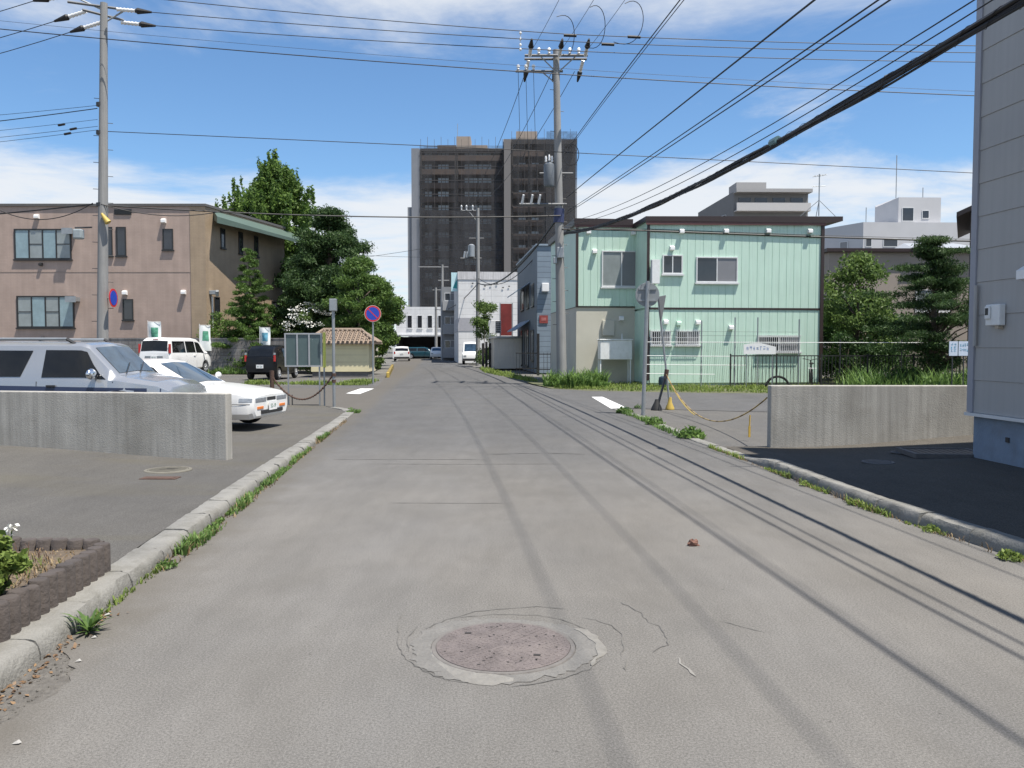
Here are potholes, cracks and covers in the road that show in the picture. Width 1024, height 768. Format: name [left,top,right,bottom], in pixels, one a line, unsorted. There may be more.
manhole cover [410,618,607,686]
crack [397,602,669,682]
manhole cover [143,466,192,474]
